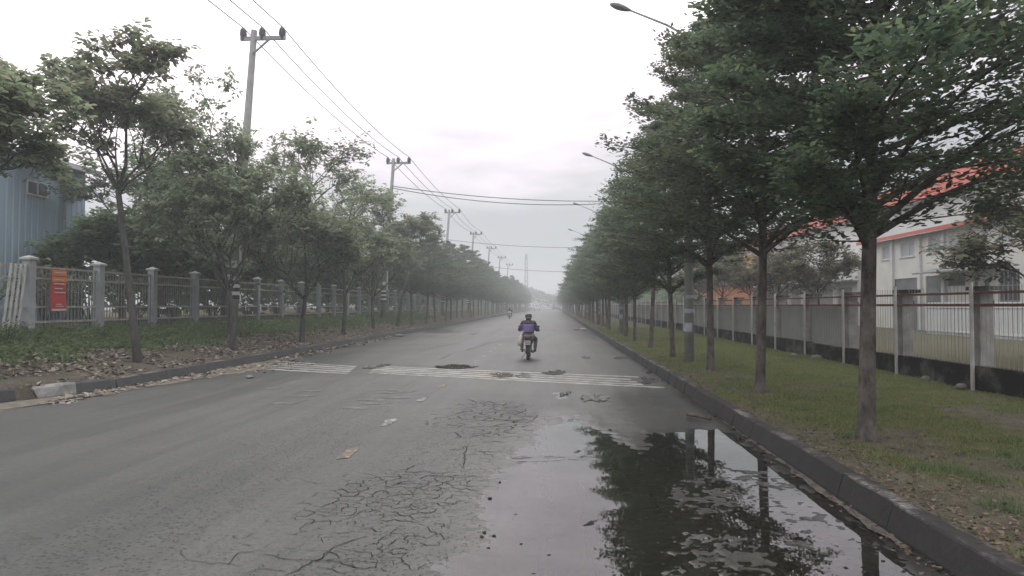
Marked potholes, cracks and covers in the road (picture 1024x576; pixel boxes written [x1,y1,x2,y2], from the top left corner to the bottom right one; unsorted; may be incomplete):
pothole [581,394,610,402]
crack [163,399,545,575]
